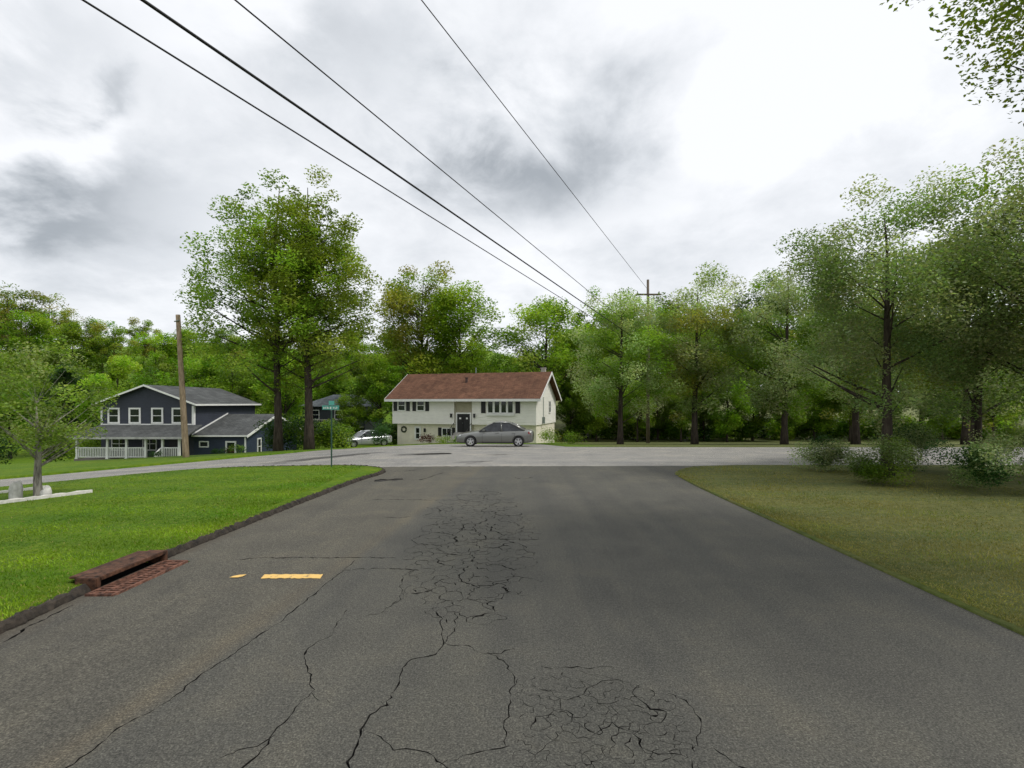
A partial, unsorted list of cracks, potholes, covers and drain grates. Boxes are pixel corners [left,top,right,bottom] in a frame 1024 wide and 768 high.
crack [4,605,73,642]
crack [512,670,746,768]
crack [211,610,347,768]
crack [241,491,539,768]
drain grate [69,550,188,596]
